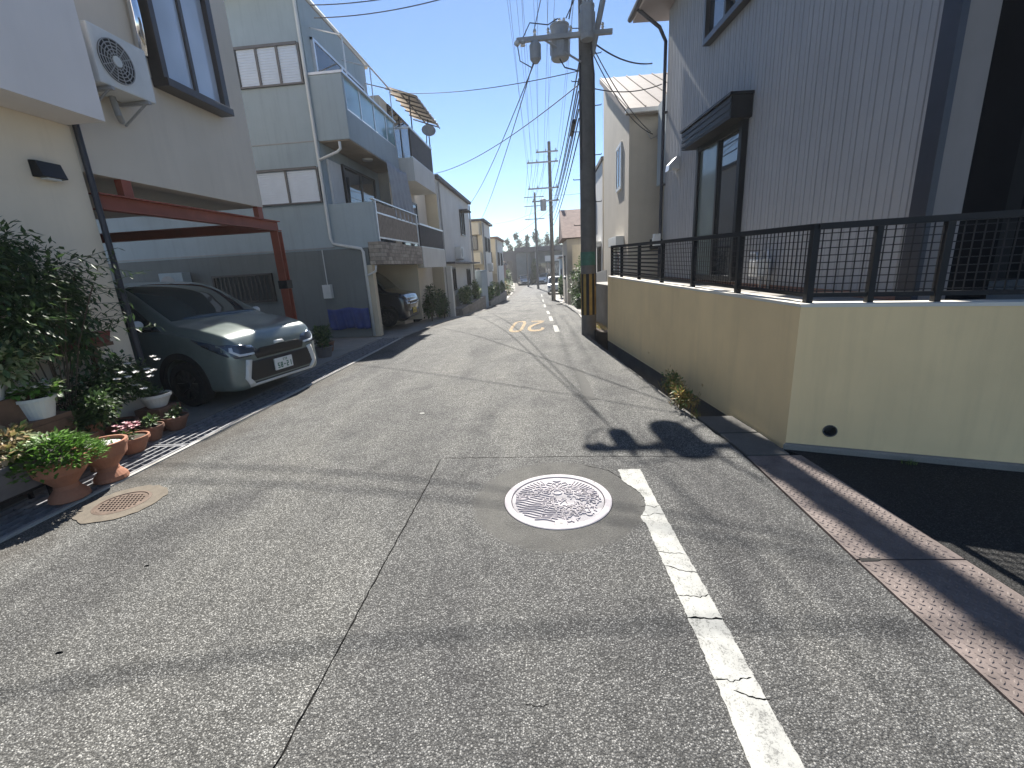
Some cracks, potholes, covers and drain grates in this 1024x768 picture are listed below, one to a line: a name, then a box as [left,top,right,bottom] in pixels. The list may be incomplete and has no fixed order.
drain grate [215,392,293,415]
manhole cover [505,474,612,530]
drain grate [263,375,327,393]
